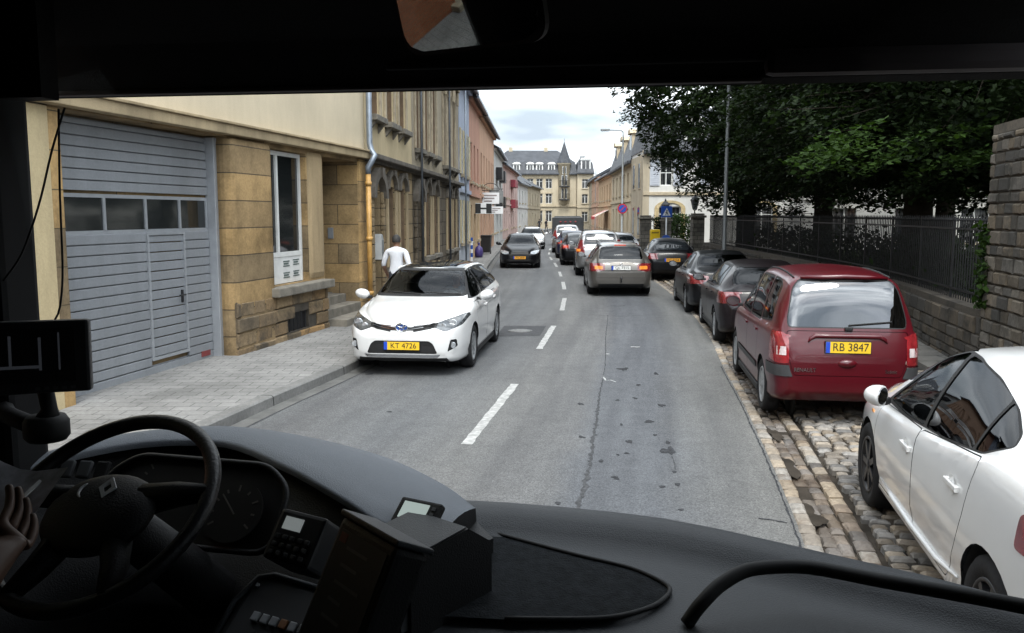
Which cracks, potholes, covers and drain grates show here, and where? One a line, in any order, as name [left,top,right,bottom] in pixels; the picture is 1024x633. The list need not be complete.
crack [575,305,673,508]
